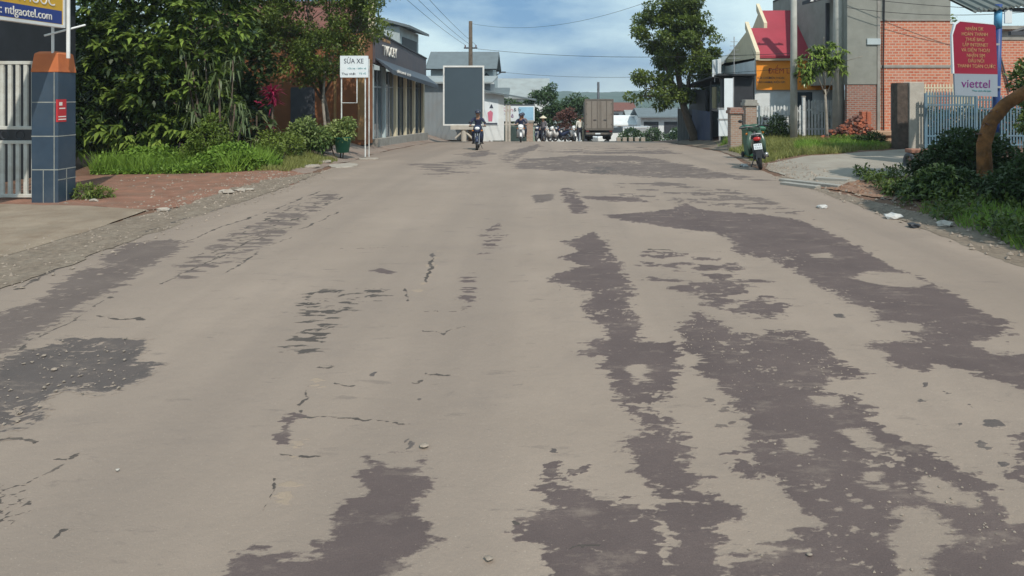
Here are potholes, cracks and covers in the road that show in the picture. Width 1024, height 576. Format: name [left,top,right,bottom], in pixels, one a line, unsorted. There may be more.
crack [276,246,466,387]
crack [0,437,80,525]
pothole [974,440,994,451]
pothole [0,334,171,443]
pothole [981,419,1008,429]
crack [295,416,411,425]
